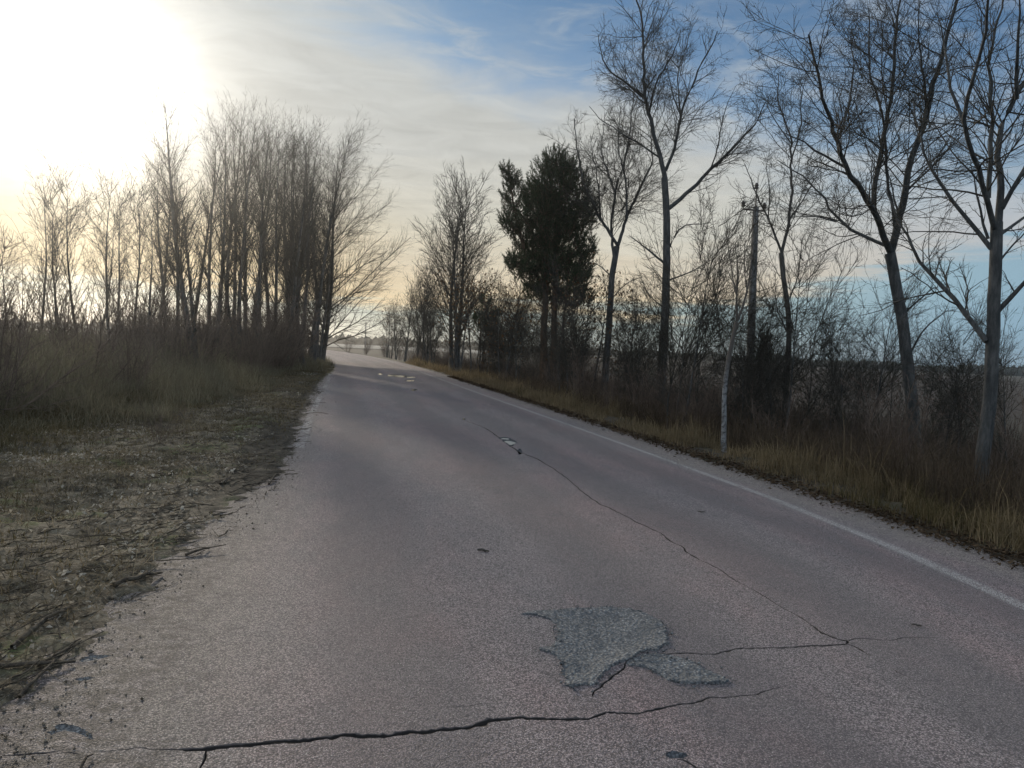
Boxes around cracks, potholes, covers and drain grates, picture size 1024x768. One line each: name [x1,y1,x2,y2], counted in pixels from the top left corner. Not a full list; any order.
crack [99,421,936,768]
